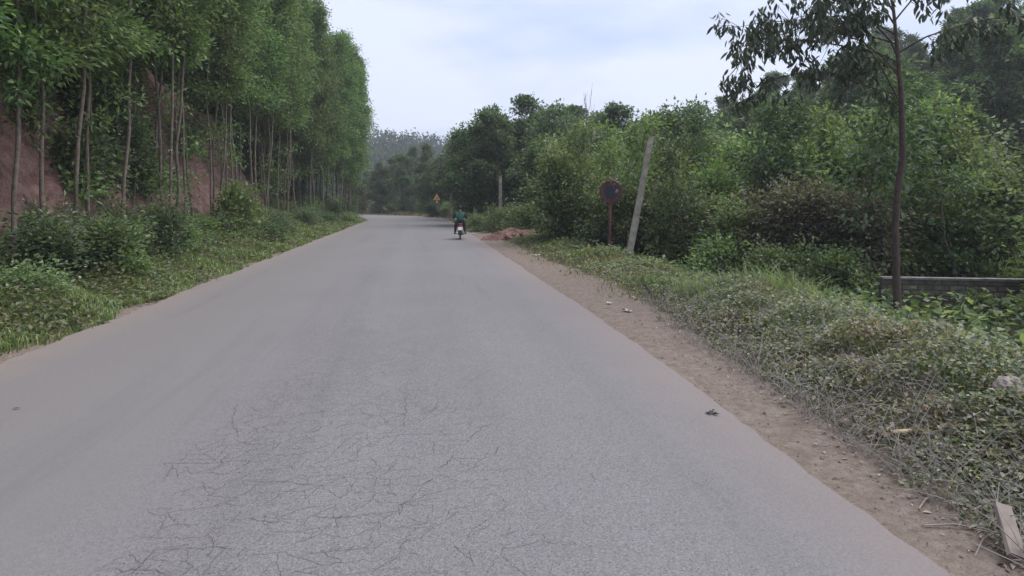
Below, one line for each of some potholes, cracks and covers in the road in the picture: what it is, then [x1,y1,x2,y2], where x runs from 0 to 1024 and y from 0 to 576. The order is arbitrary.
crack [89,314,636,576]
